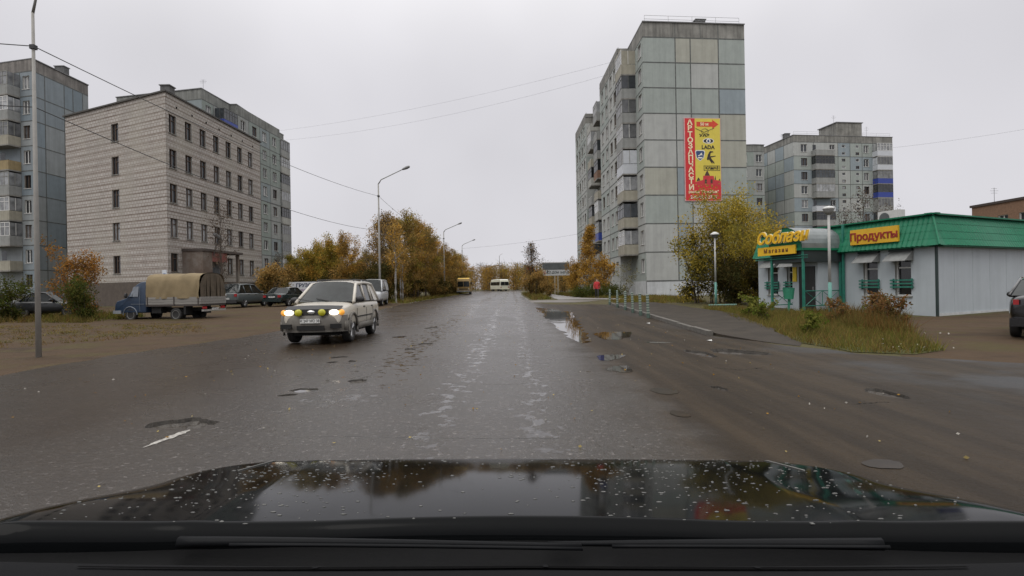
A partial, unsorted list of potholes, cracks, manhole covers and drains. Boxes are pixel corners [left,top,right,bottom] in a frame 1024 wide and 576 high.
pothole [864,388,910,399]
pothole [145,417,219,429]
